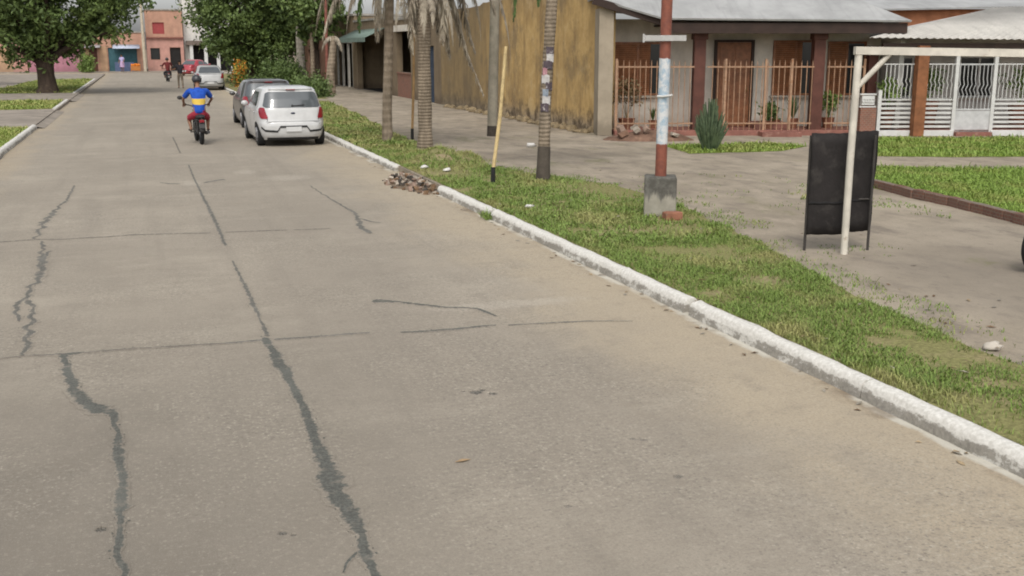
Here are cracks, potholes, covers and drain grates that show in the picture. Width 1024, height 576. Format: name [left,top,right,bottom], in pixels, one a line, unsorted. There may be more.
crack [0,137,627,576]
